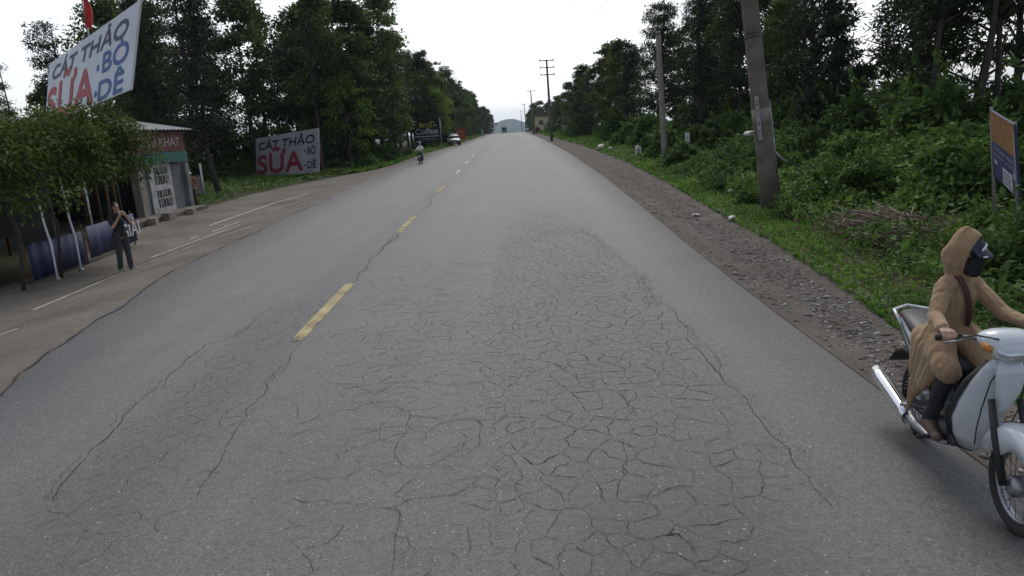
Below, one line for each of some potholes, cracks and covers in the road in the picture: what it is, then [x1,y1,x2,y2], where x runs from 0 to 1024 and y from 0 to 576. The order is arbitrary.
crack [267,207,837,576]
crack [36,275,341,569]
